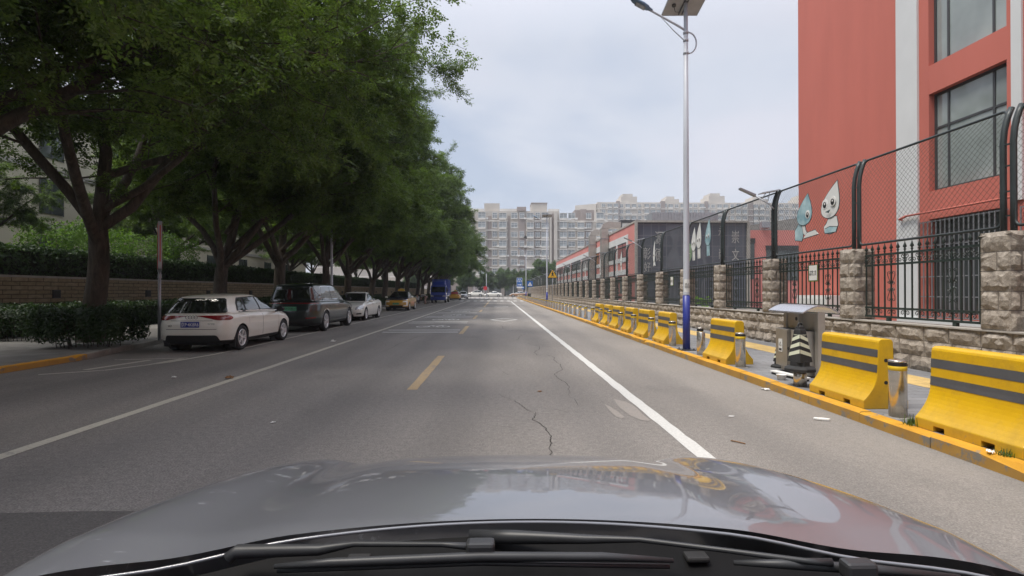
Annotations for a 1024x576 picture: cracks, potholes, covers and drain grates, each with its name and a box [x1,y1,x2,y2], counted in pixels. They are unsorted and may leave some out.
crack [499,328,579,455]
